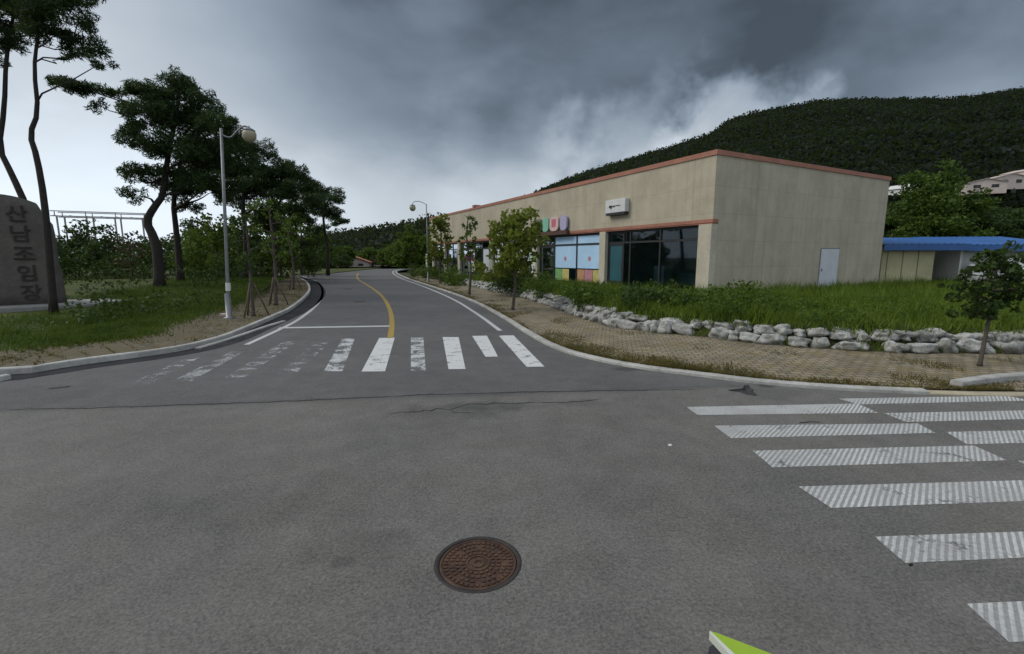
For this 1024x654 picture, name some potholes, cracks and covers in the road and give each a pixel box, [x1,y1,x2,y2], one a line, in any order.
pothole [729,385,758,396]
manhole cover [434,536,521,594]
crack [10,389,694,414]
